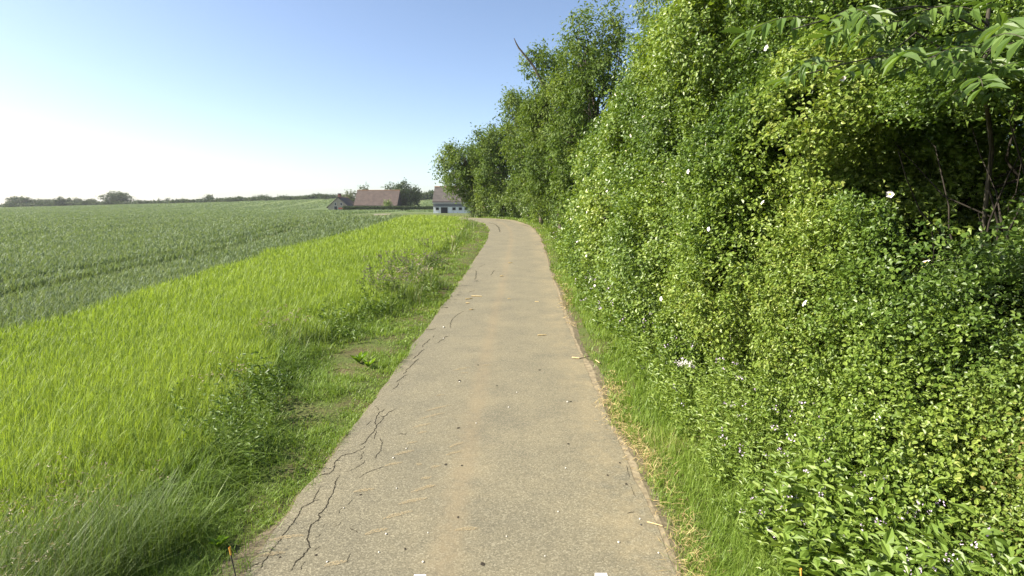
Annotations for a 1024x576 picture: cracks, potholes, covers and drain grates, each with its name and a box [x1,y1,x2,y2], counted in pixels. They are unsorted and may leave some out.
crack [246,409,393,571]
crack [393,296,460,389]
